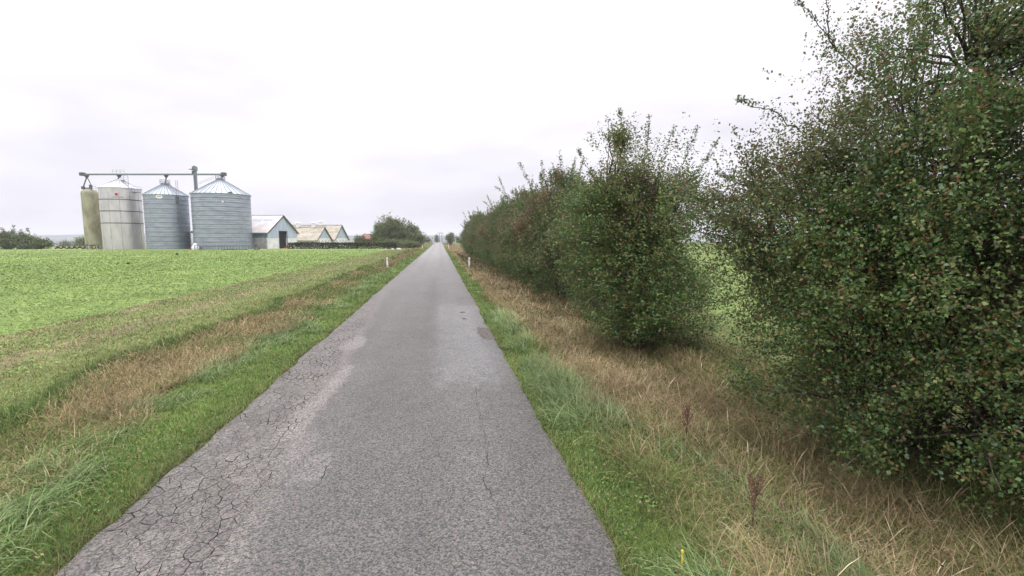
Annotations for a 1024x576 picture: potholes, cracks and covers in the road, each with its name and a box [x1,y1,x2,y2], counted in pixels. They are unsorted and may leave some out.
crack [64,296,380,576]
